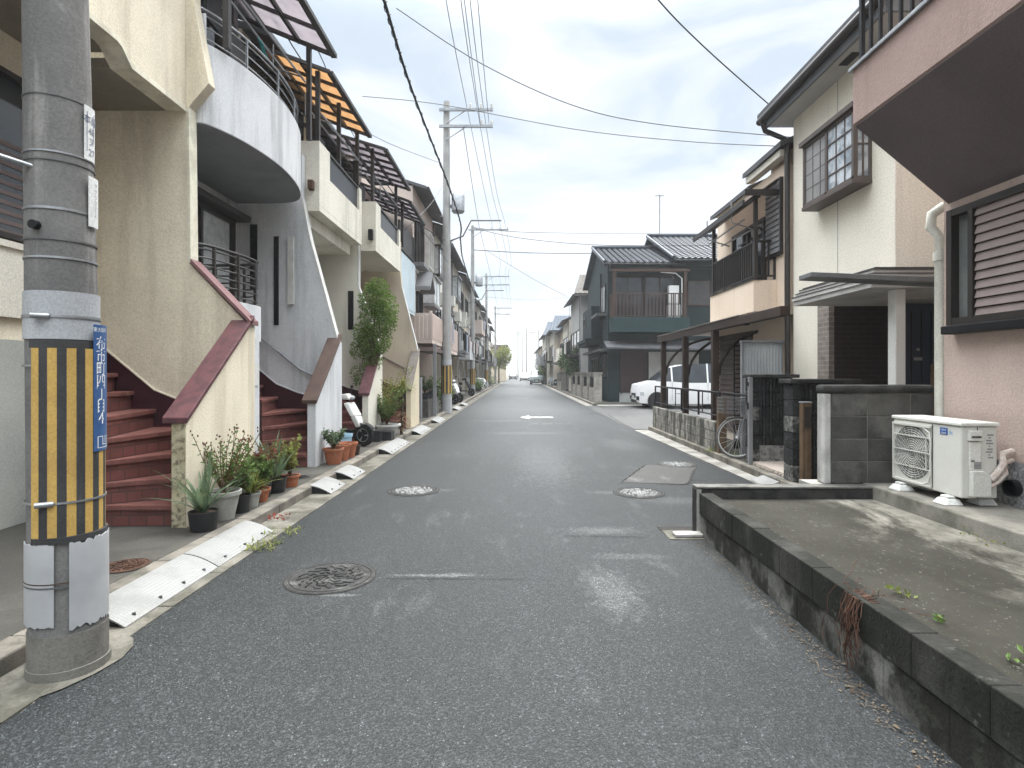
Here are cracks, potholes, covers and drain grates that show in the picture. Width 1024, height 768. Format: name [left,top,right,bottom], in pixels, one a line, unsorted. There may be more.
manhole cover [109,558,152,574]
manhole cover [387,485,440,496]
manhole cover [283,562,377,595]
manhole cover [613,487,665,498]
